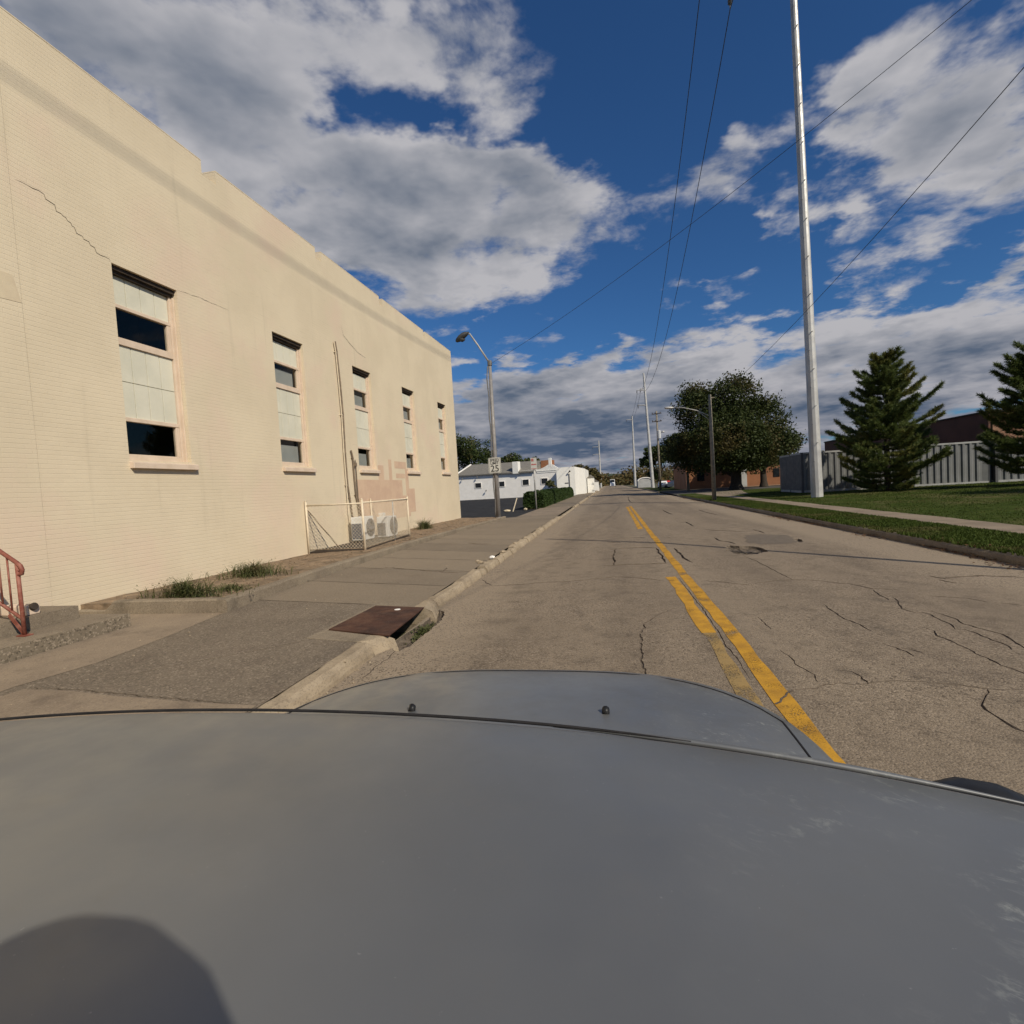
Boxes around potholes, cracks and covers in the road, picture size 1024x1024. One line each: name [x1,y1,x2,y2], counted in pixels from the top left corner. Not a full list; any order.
pothole [724,545,768,555]
manhole cover [329,605,424,637]
crack [482,510,1024,732]
